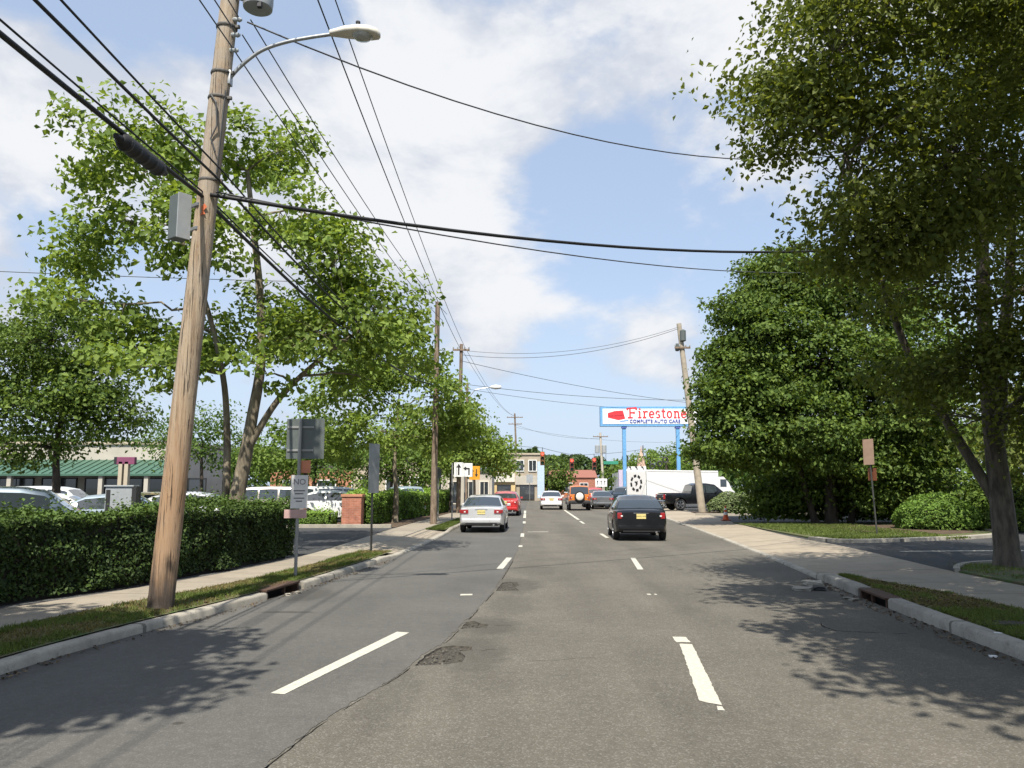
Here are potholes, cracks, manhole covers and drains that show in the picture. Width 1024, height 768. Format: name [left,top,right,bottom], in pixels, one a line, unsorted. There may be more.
pothole [496,582,519,591]
pothole [461,621,488,629]
drain grate [251,580,300,599]
drain grate [859,588,903,608]
pothole [415,646,472,666]
